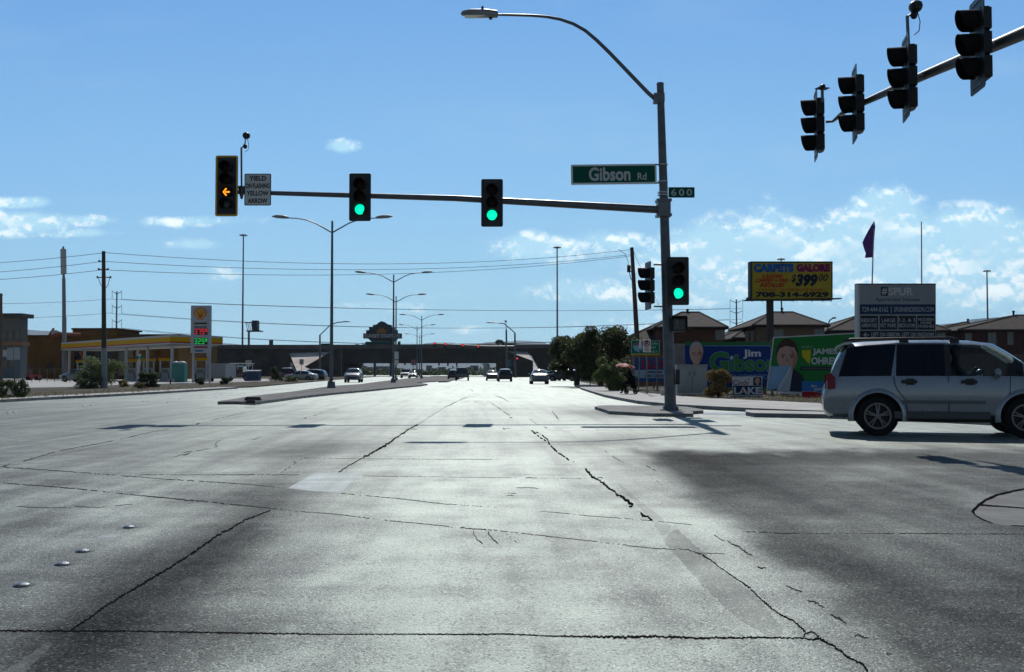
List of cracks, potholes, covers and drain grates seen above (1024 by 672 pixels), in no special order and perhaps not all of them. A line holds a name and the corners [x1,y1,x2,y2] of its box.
crack [0,411,892,672]
